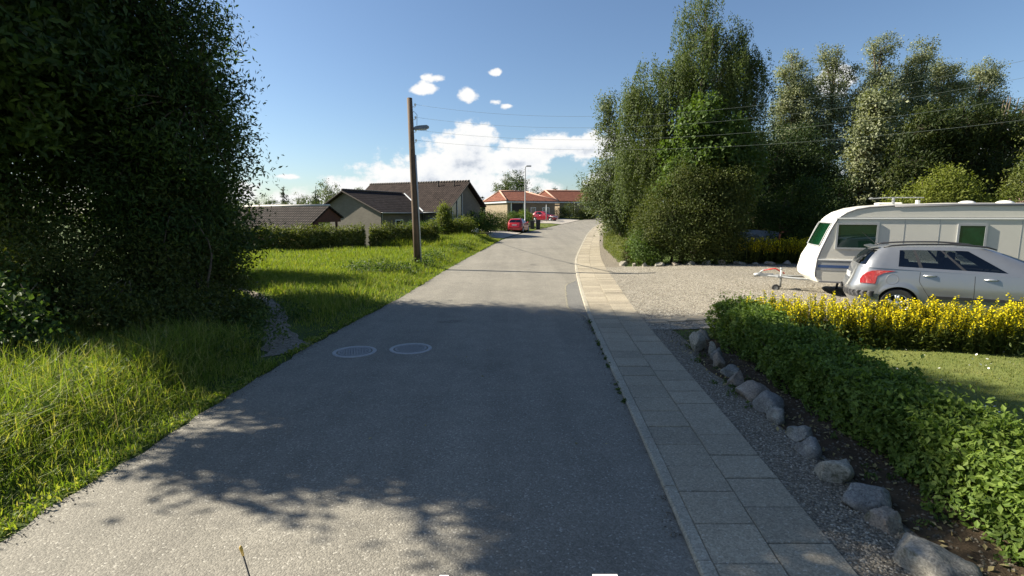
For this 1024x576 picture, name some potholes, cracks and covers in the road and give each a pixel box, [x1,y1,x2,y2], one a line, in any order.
manhole cover [389,343,432,354]
